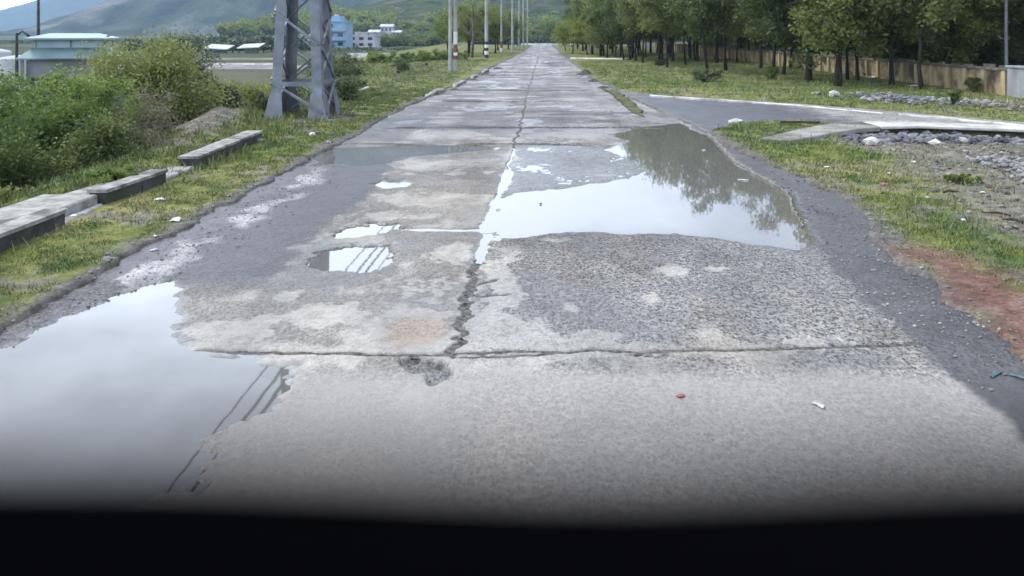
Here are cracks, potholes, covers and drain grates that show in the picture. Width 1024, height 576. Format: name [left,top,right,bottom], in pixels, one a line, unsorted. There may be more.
pothole [293,242,406,276]
pothole [388,353,463,399]
pothole [323,220,407,240]
crack [447,65,590,102]
